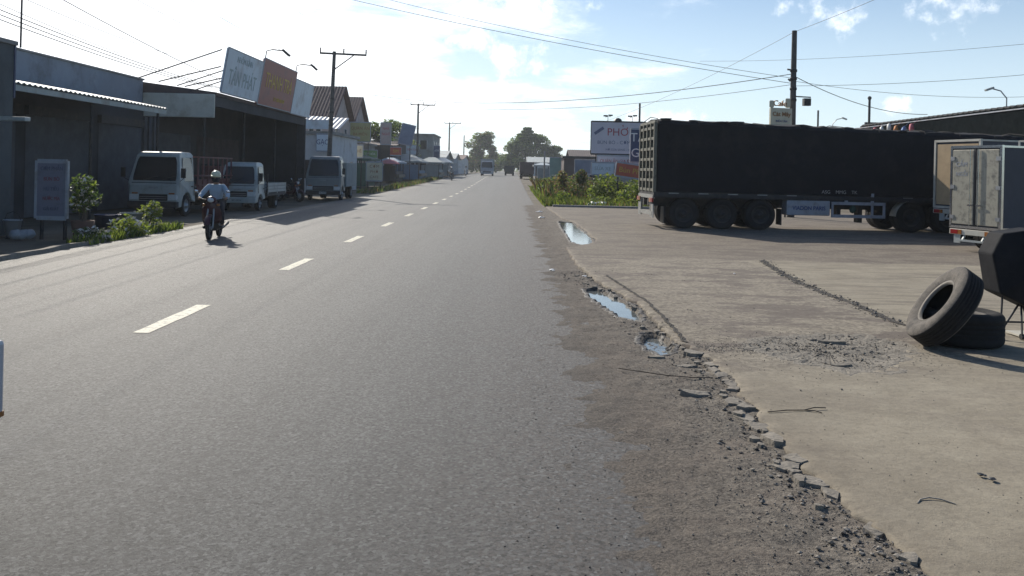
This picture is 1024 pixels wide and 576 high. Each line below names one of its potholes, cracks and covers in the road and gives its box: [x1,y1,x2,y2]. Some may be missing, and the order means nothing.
pothole [581,287,648,322]
pothole [737,332,922,376]
pothole [557,221,595,245]
pothole [633,332,681,357]
